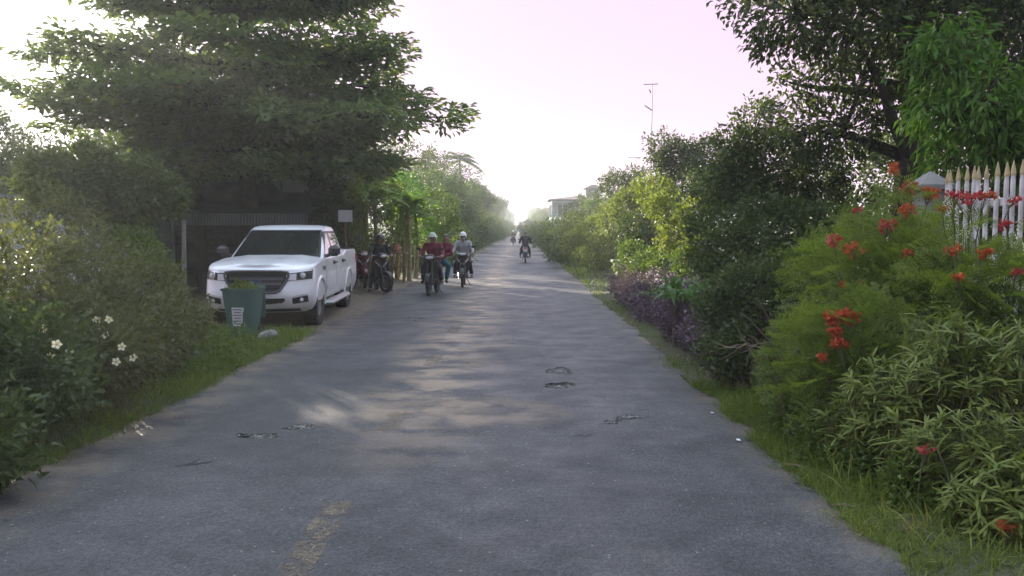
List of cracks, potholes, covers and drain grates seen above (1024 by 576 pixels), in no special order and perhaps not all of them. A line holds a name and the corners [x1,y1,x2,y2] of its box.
pothole [542,381,578,389]
pothole [544,367,573,375]
